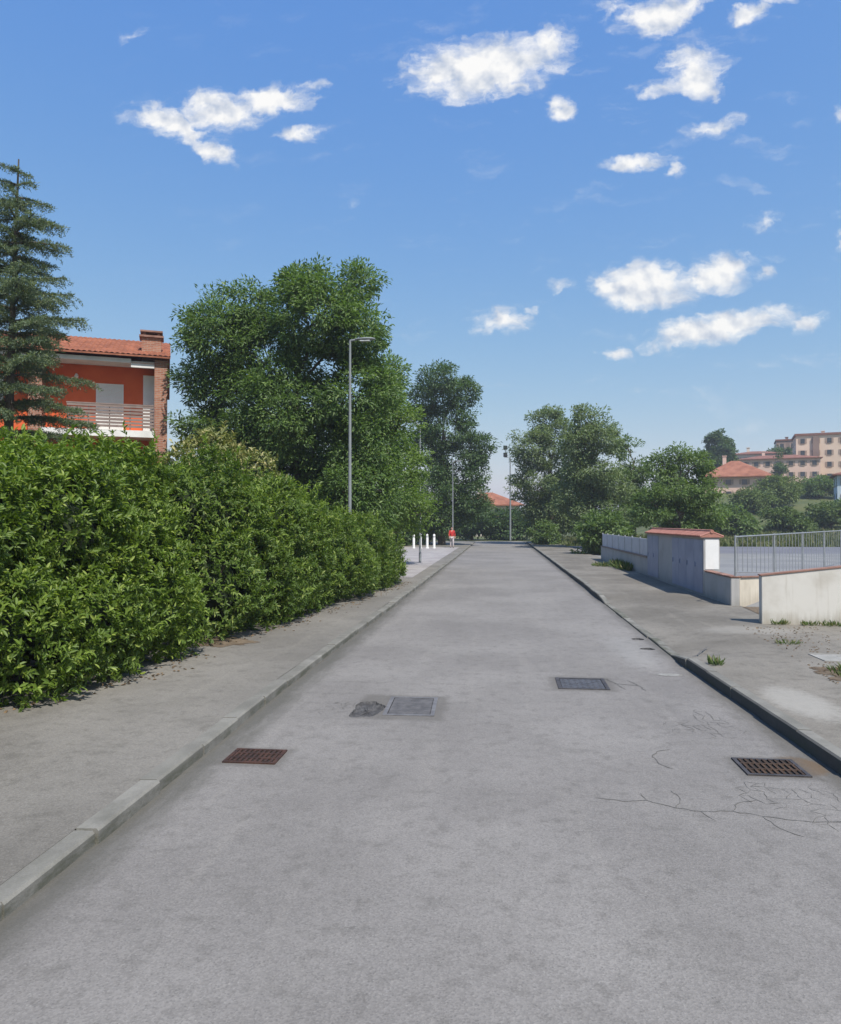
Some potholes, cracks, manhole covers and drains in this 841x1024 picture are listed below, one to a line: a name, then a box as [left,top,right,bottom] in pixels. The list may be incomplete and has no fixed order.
drain grate [222,748,287,765]
crack [596,782,841,837]
manhole cover [382,696,438,717]
crack [663,709,755,739]
drain grate [731,757,813,778]
pothole [349,701,386,717]
manhole cover [555,677,611,690]
